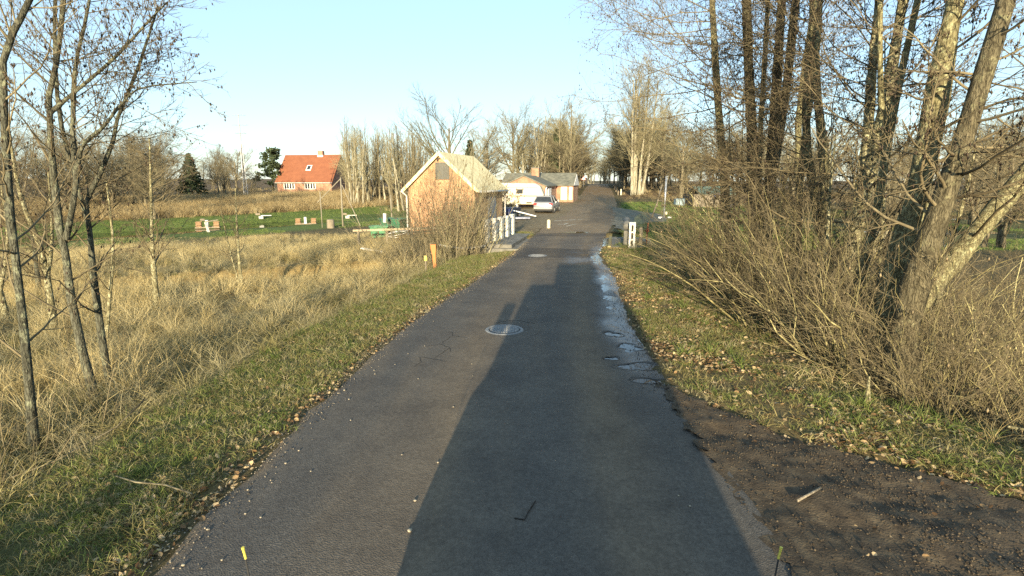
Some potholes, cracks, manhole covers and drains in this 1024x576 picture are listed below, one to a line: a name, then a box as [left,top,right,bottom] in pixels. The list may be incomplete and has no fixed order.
manhole cover [485,324,523,335]
